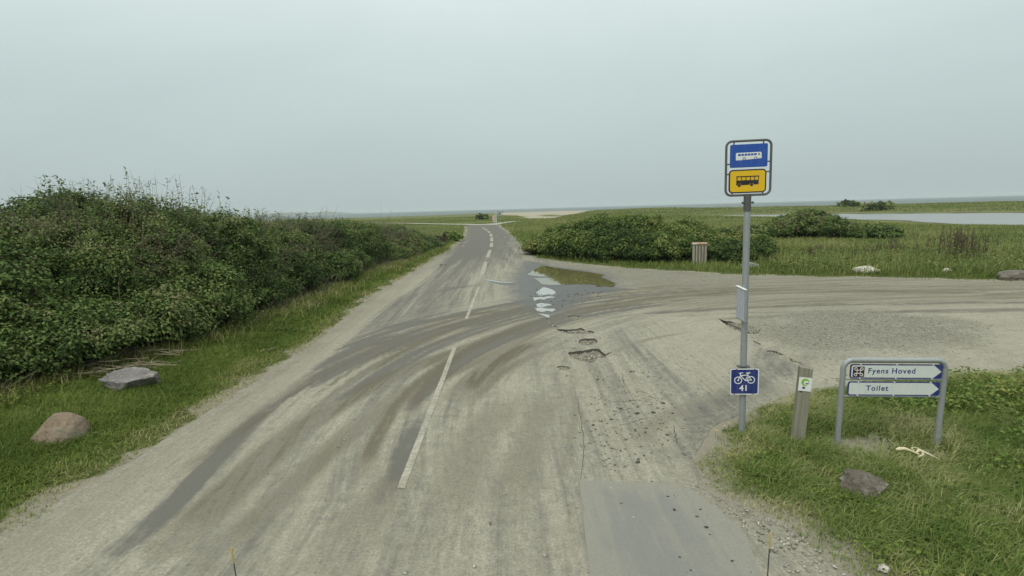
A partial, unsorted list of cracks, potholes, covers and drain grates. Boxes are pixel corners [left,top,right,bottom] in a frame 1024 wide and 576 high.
pothole [720,319,760,334]
pothole [568,349,606,363]
